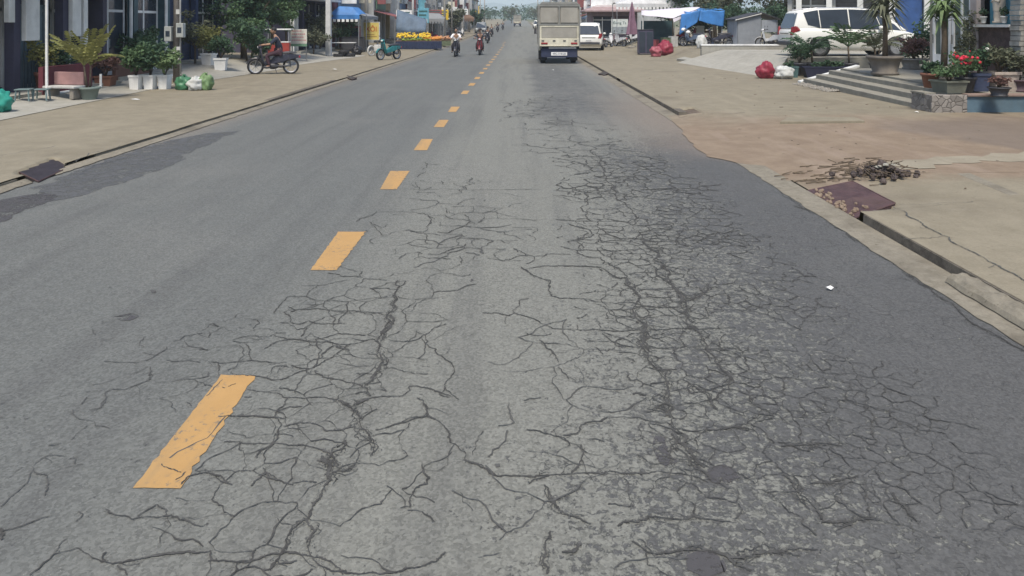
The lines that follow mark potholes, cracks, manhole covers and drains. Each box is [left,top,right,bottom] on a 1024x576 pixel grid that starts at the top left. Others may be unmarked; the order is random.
pothole [686,550,727,576]
crack [72,314,268,458]
crack [154,327,483,576]
crack [76,504,200,543]
crack [603,268,678,417]
crack [29,539,256,576]
crack [521,265,630,303]
crack [369,177,527,268]
crack [556,152,761,247]
crack [567,226,847,330]
pothole [706,464,740,485]
